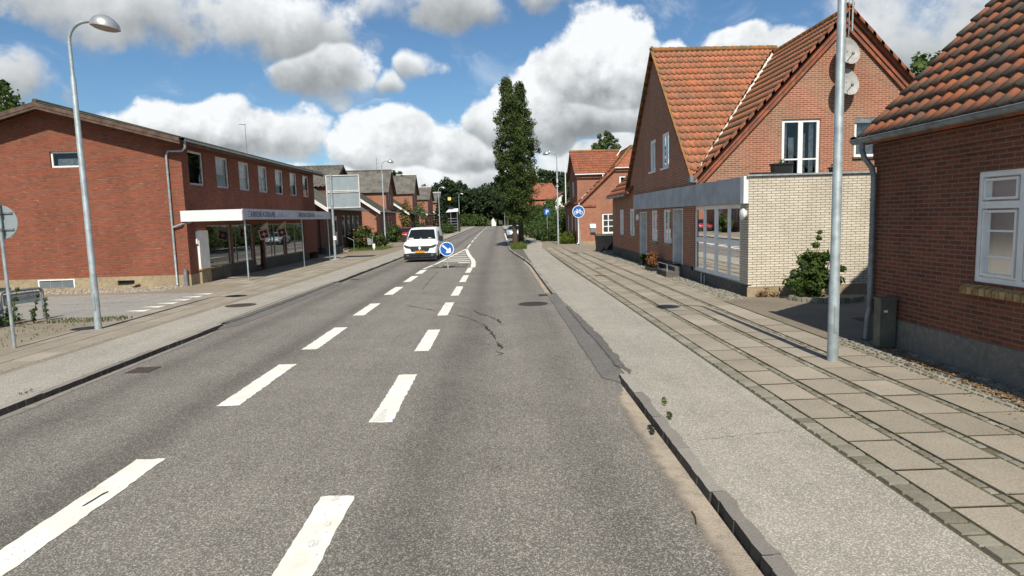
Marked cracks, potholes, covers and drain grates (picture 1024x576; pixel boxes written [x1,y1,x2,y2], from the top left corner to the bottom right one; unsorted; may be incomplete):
drain grate [124,366,162,374]
crack [394,292,509,355]
